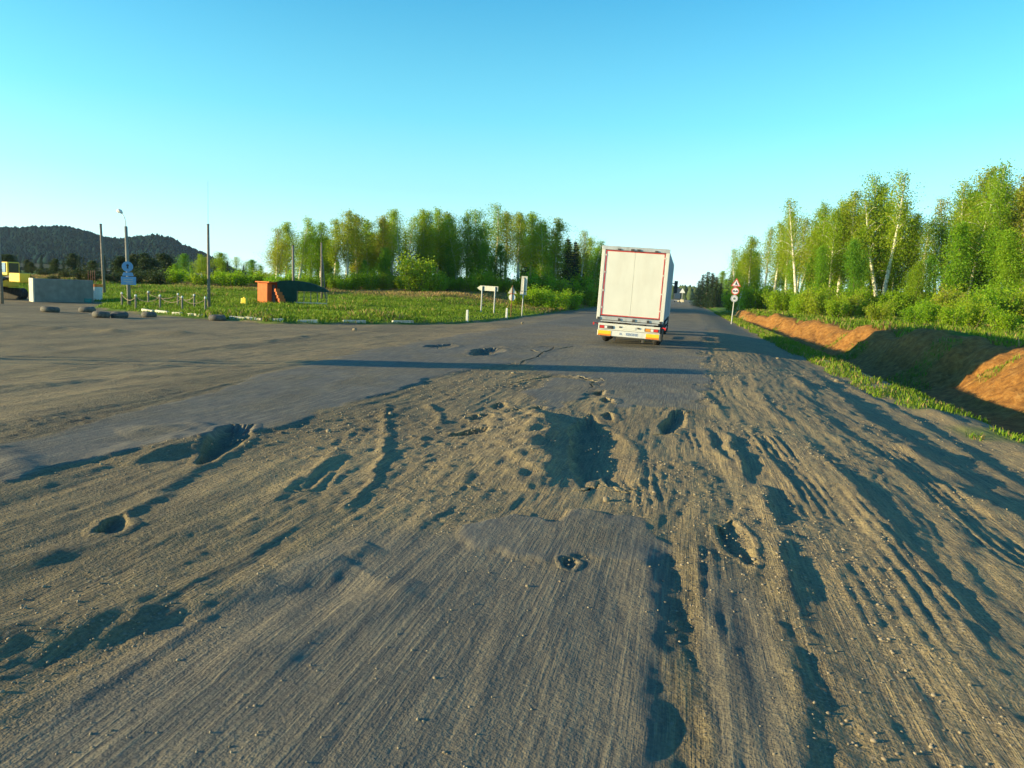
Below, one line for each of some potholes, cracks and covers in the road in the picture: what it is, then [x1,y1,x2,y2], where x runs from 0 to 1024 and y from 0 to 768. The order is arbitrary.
pothole [461,347,513,357]
crack [506,346,608,387]
pothole [558,413,648,494]
pothole [554,554,585,572]
pothole [708,518,766,569]
pothole [593,411,622,423]
pothole [80,509,144,538]
pothole [649,408,696,437]
pothole [185,423,263,468]
